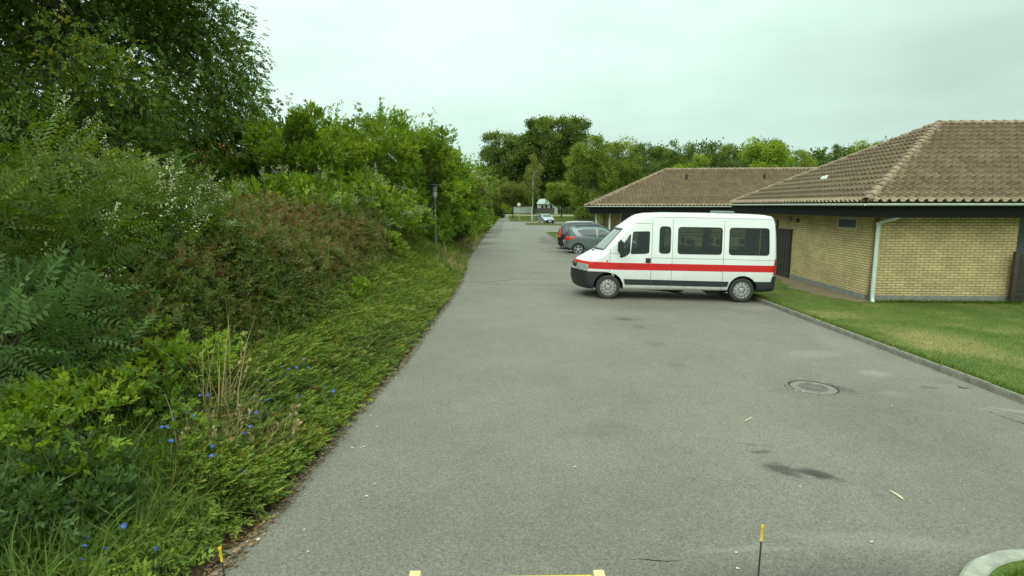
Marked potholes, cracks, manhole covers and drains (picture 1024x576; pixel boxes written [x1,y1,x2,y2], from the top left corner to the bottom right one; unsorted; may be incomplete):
manhole cover [788,381,840,395]
